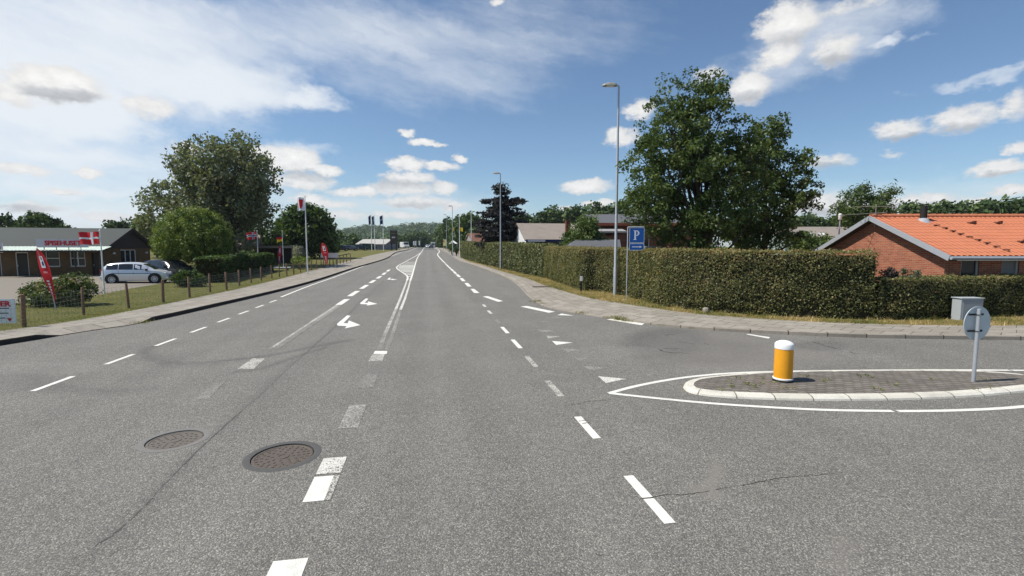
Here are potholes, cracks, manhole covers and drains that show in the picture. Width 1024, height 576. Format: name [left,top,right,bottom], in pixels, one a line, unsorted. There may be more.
crack [634,470,849,499]
manhole cover [136,428,211,453]
manhole cover [242,441,321,472]
